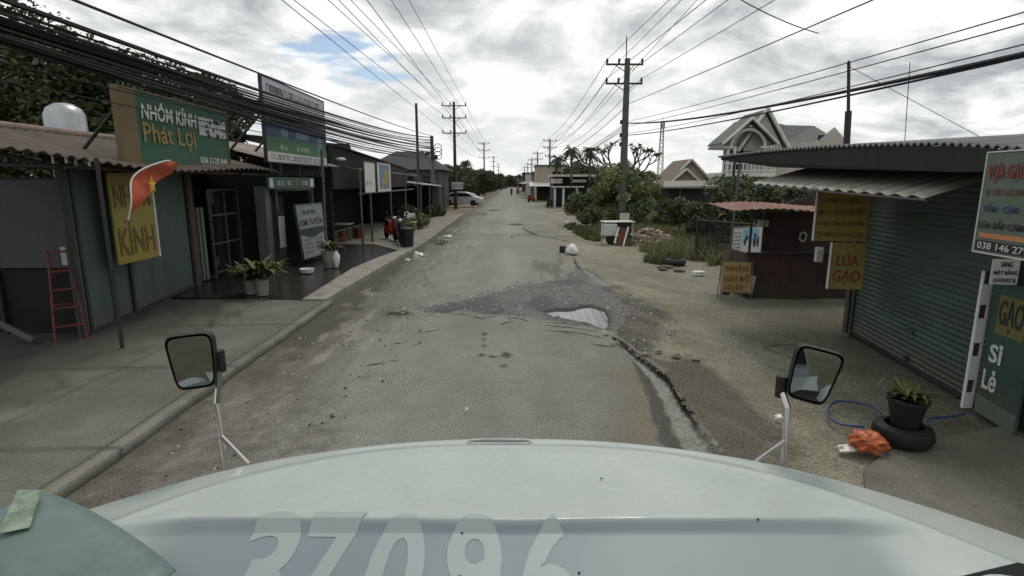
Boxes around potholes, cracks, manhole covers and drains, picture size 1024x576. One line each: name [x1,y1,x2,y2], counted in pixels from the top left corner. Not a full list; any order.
crack [545,322,613,348]
pothole [537,304,615,331]
crack [511,224,585,273]
